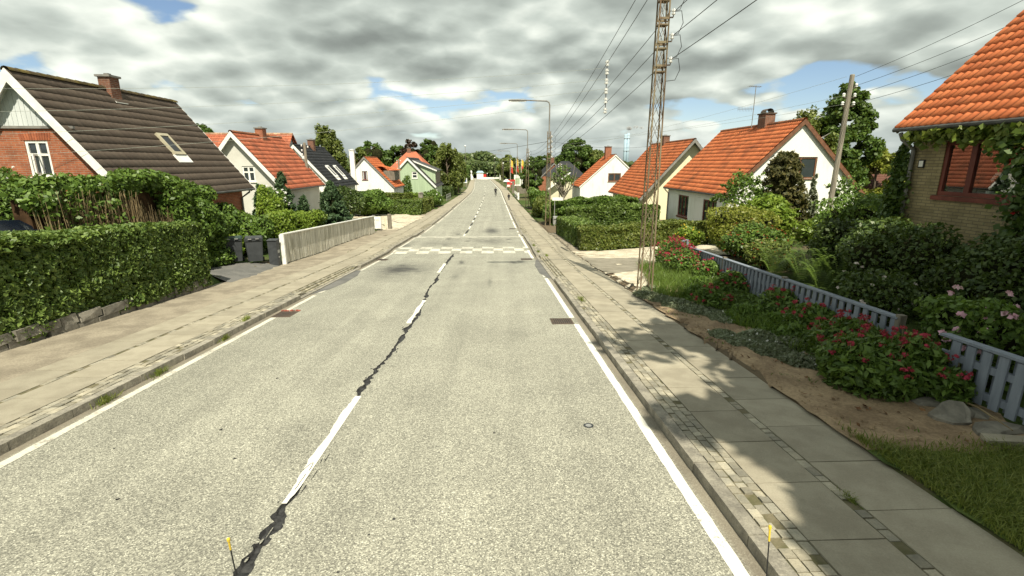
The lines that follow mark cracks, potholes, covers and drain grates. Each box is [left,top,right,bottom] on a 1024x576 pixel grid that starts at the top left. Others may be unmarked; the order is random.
crack [356,255,454,396]
crack [233,453,330,576]
